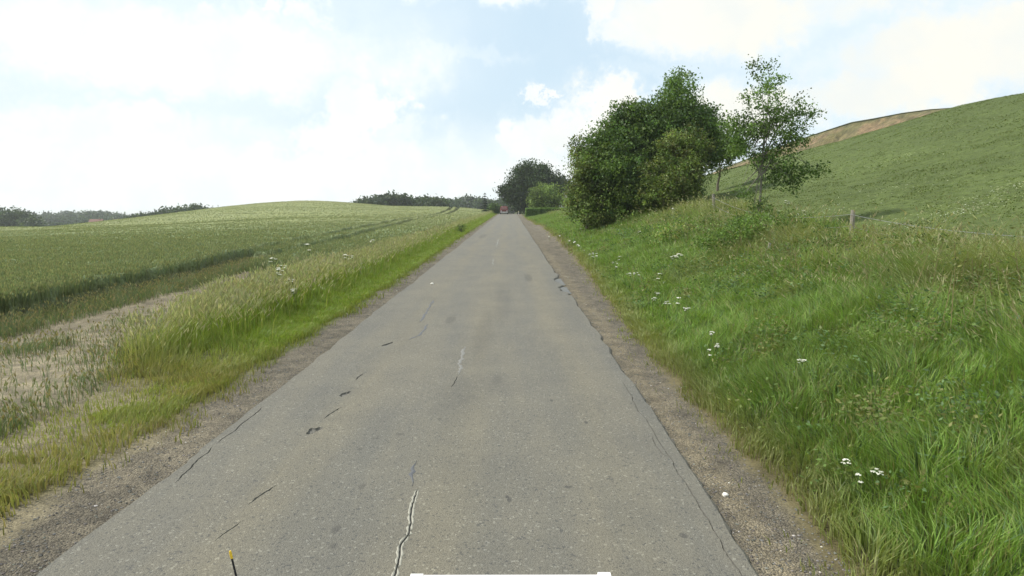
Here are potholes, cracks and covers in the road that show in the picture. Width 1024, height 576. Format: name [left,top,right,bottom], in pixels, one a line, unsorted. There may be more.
crack [624,384,743,576]
crack [175,408,261,483]
crack [215,485,276,541]
crack [391,488,419,576]
